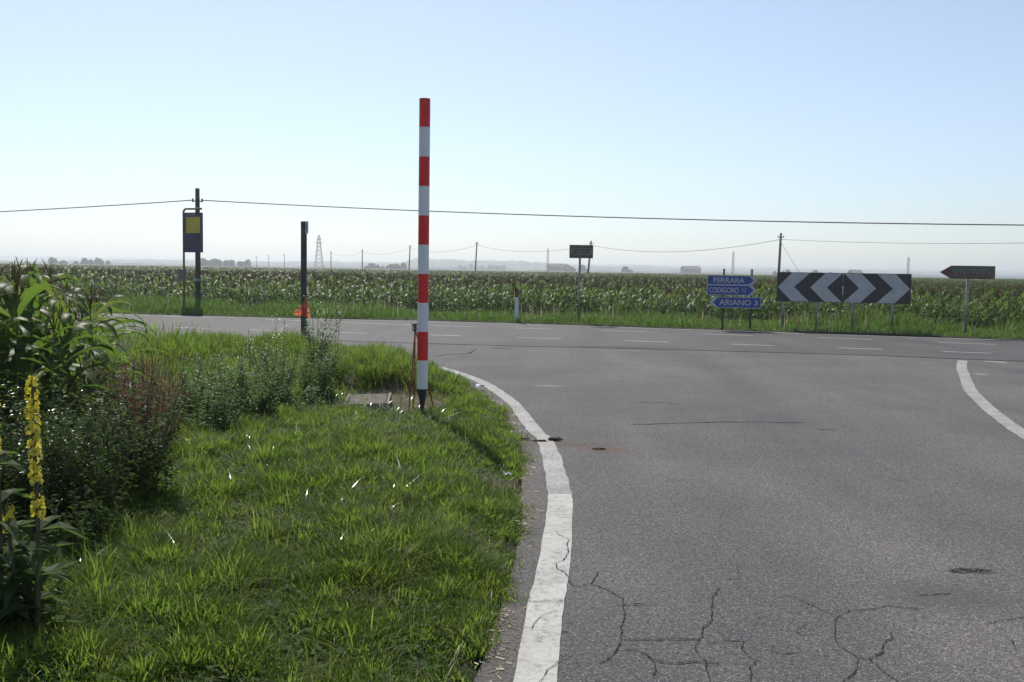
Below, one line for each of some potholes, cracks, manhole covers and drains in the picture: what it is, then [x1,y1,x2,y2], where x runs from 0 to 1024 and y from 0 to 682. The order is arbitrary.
crack [569,565,795,682]
crack [786,593,950,682]
